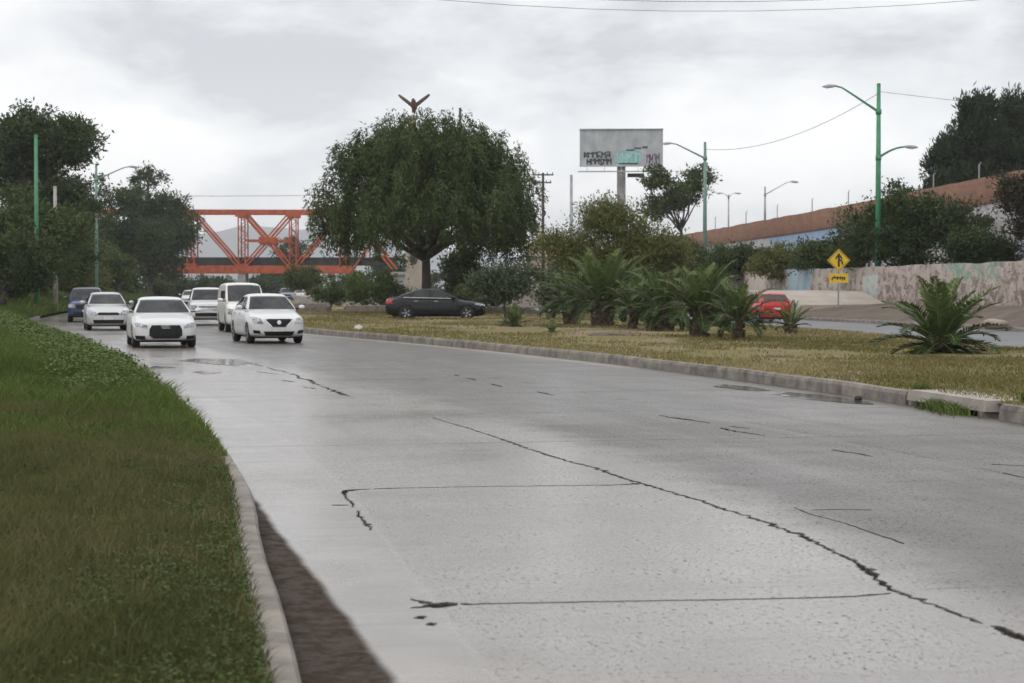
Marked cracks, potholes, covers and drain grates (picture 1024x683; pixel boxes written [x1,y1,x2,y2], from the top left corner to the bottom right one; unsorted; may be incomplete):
drain grate [907,389,1019,420]
crack [251,363,349,396]
crack [342,418,983,624]
